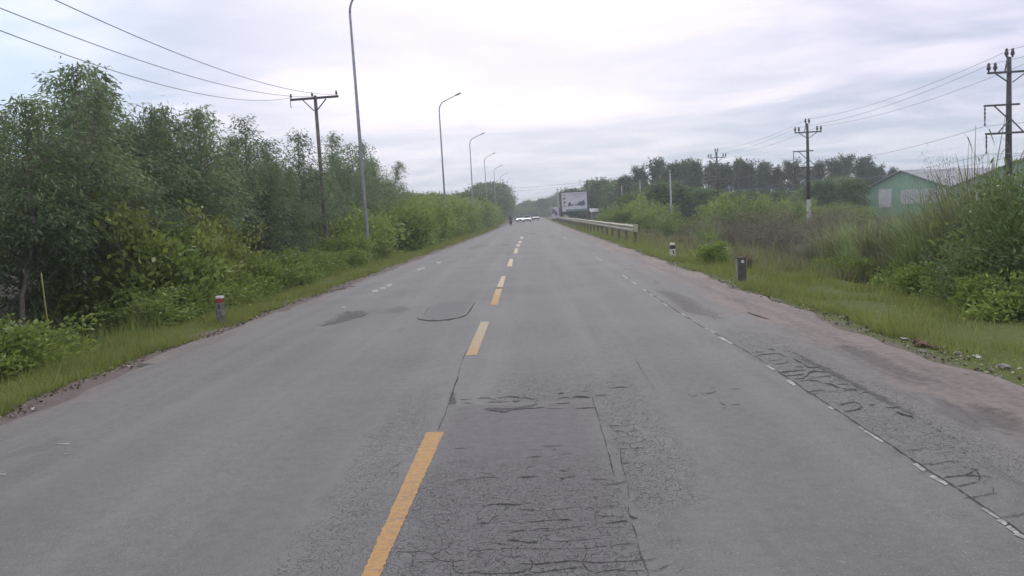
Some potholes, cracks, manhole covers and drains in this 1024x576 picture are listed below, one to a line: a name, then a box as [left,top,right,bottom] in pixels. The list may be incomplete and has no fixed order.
crack [646,290,1024,535]
crack [399,359,683,574]
